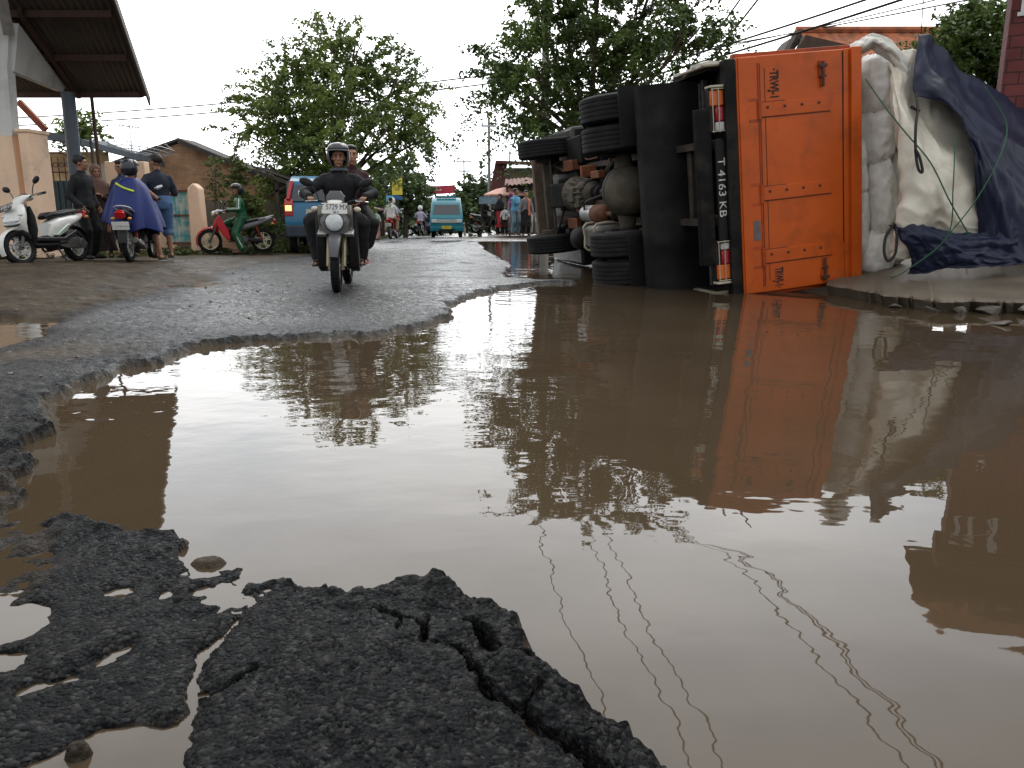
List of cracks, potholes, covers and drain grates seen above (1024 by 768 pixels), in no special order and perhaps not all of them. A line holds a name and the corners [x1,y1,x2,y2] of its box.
pothole [0,278,667,768]
crack [365,602,619,768]
